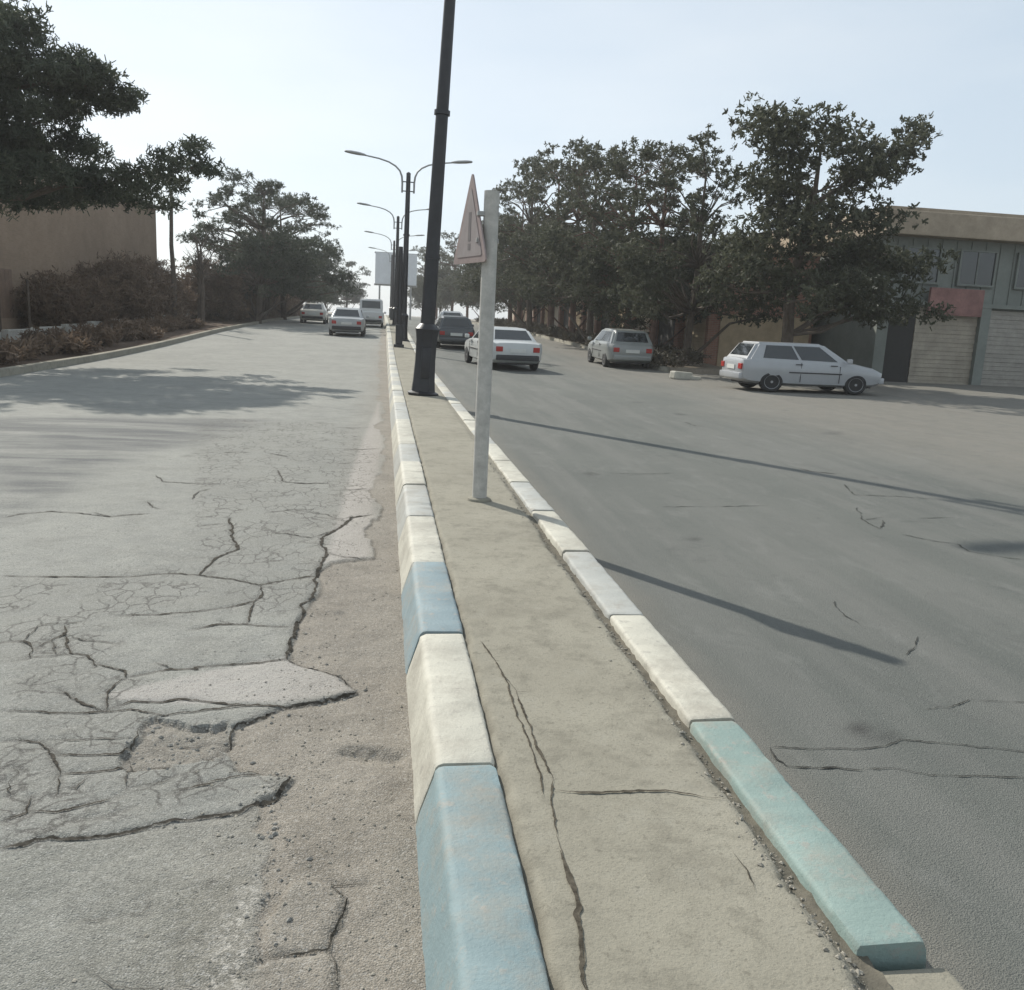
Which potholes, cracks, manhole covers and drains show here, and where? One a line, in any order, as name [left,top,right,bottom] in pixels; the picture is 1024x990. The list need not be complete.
crack [770,738,1021,777]
crack [1,509,367,848]
crack [7,474,219,517]
crack [804,469,929,528]
crack [483,644,730,990]
crack [247,883,365,990]
pothole [115,715,237,773]
